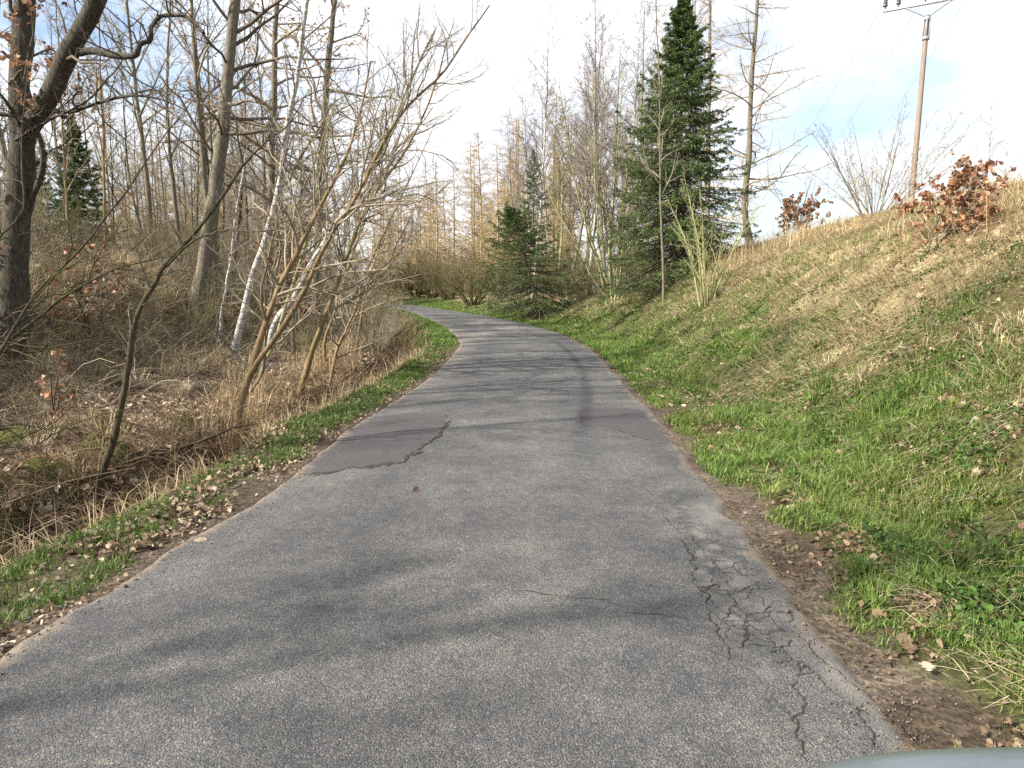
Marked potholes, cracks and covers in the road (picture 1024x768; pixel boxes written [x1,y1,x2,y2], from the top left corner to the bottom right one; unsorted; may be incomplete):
crack [517,517,916,761]
crack [298,413,450,475]
